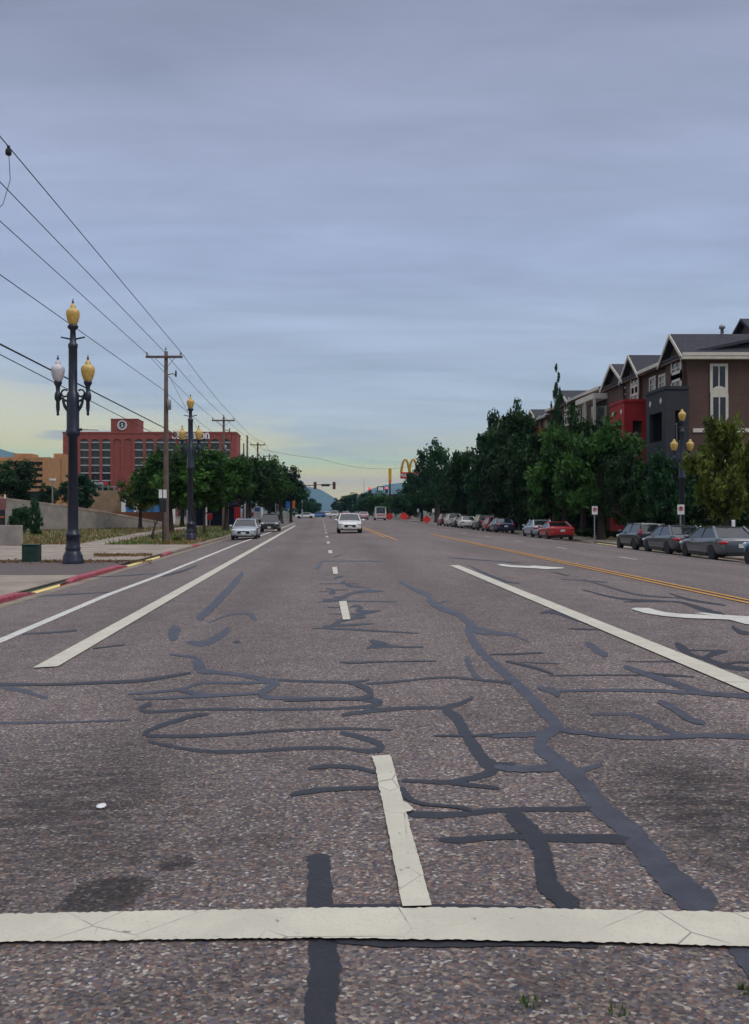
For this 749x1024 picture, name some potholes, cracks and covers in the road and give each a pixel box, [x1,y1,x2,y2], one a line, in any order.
crack [0,672,191,699]
crack [340,640,435,663]
crack [489,652,694,677]
crack [448,557,749,635]
crack [94,565,197,577]
crack [6,629,125,649]
